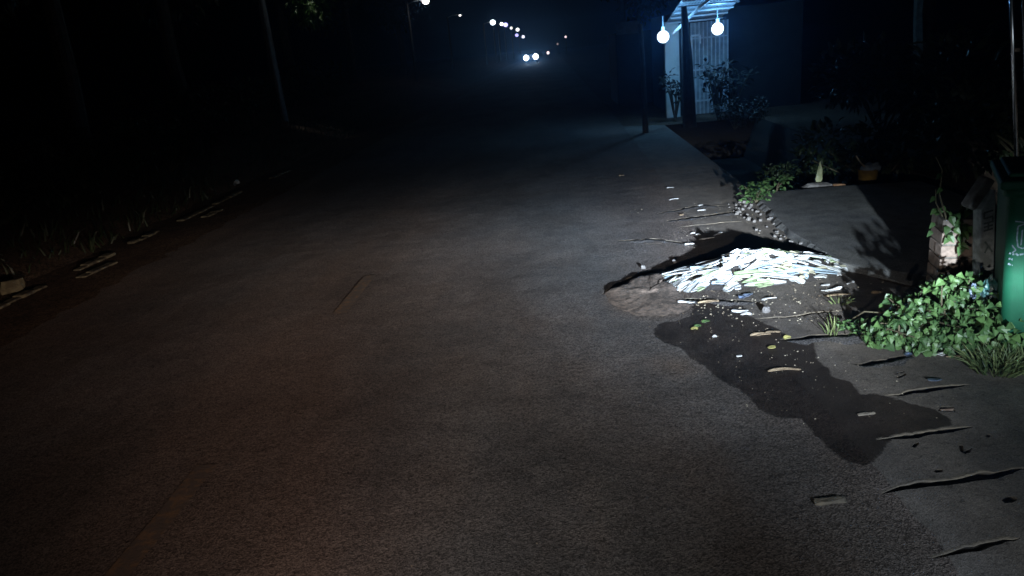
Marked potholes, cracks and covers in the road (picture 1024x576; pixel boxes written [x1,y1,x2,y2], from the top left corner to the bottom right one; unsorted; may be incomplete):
crack [931,536,1019,558]
crack [618,205,744,247]
crack [876,425,974,440]
